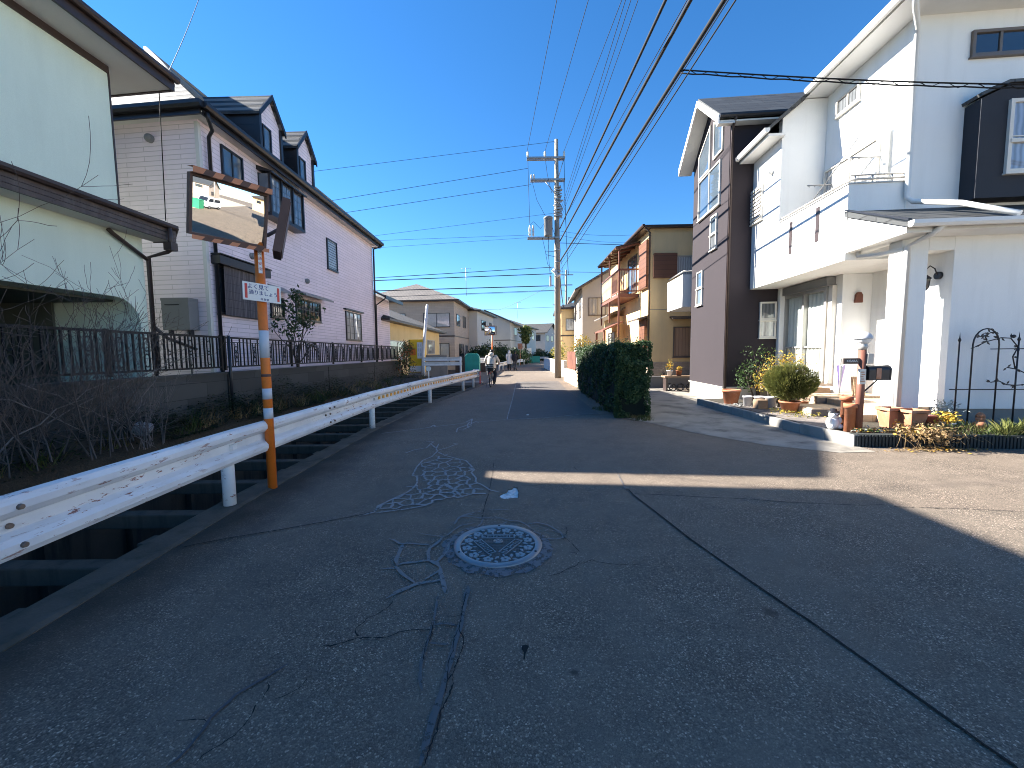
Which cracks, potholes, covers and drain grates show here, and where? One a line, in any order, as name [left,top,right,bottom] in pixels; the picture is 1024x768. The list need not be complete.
manhole cover [442,523,554,577]
crack [364,419,498,517]
crack [323,577,471,766]
